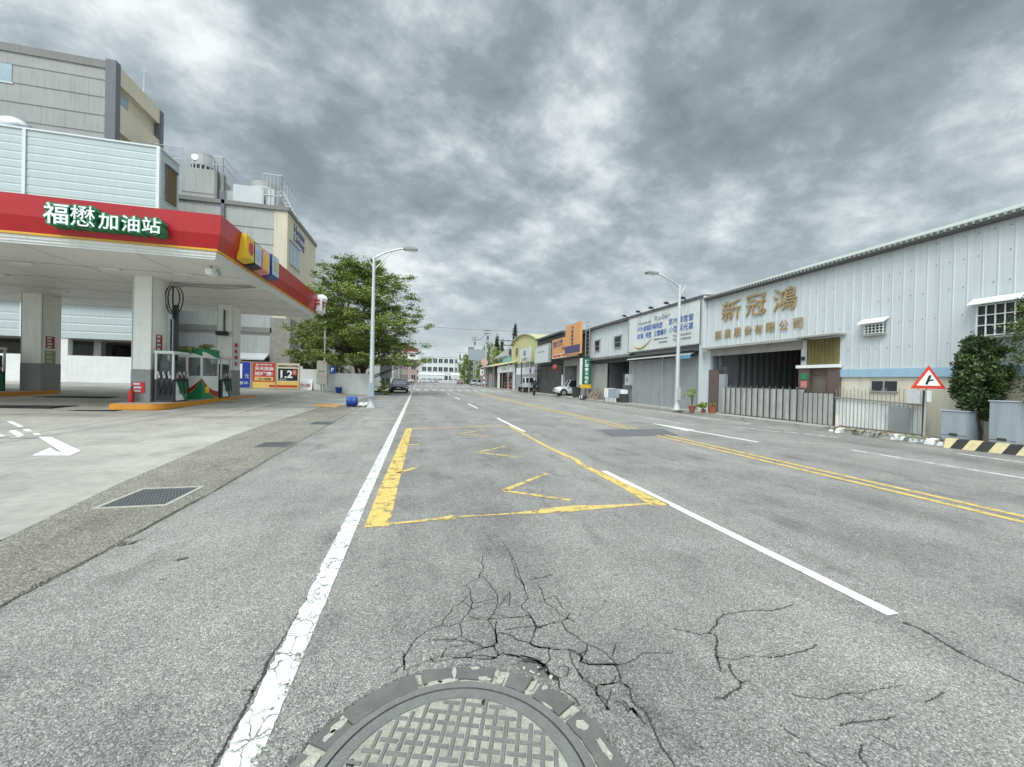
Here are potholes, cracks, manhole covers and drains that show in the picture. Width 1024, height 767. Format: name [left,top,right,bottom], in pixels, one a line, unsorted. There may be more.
manhole cover [289,666,628,767]
crack [395,542,817,767]
crack [903,622,1024,684]
drain grate [91,486,205,509]
crack [792,685,903,700]
crack [837,717,895,767]
crack [779,724,827,767]
